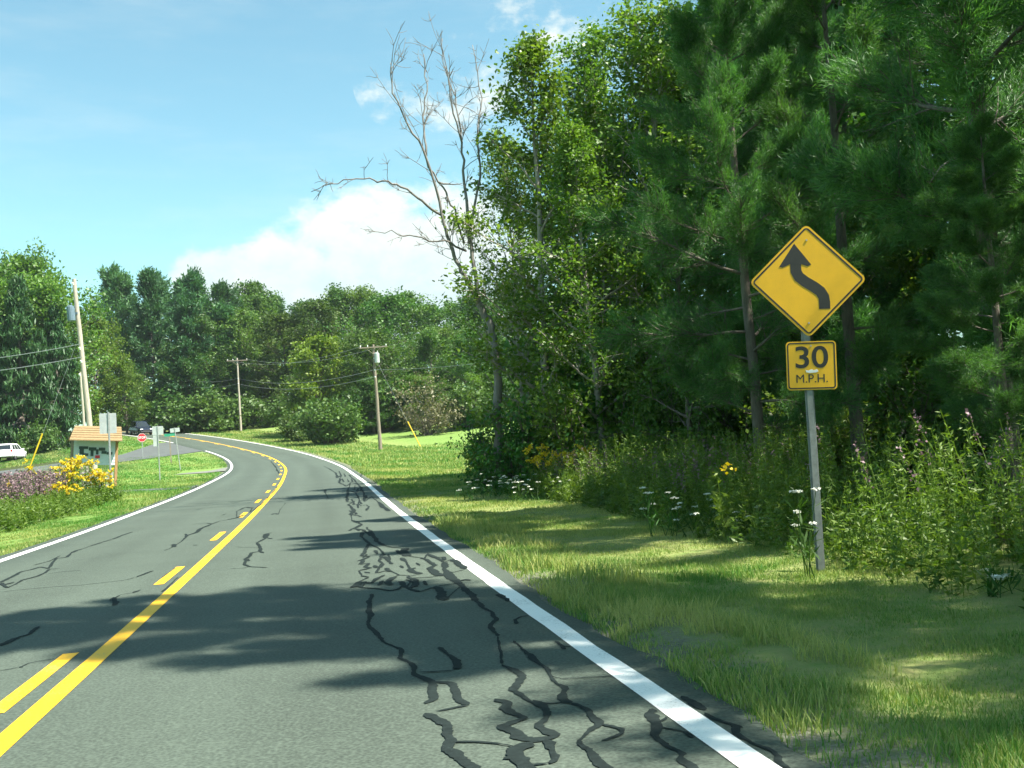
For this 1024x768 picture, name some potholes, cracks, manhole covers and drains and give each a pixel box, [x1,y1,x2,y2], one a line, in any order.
crack [0,532,178,605]
crack [324,466,479,601]
